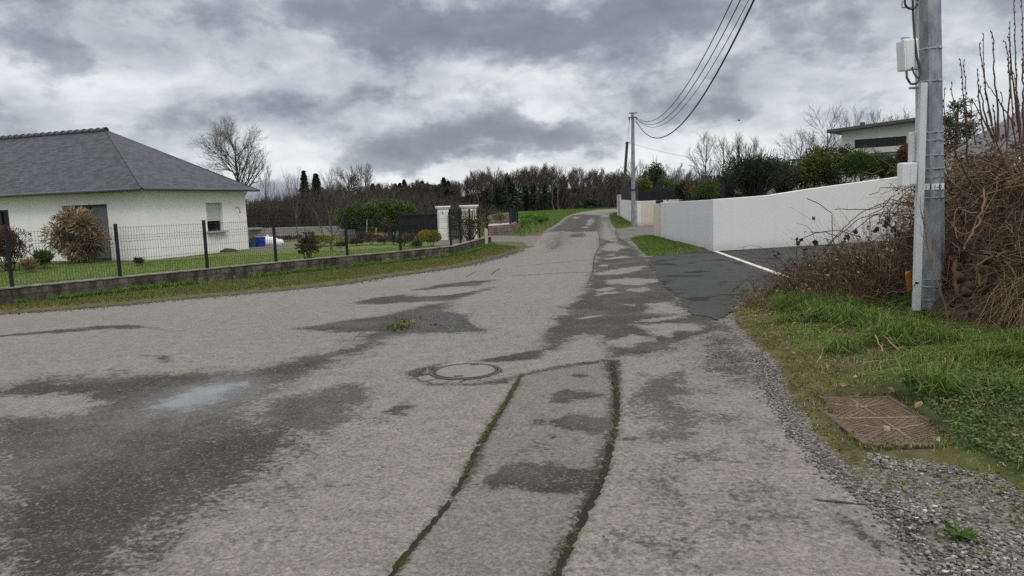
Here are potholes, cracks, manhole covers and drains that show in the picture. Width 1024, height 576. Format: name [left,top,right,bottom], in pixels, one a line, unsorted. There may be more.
manhole cover [418,363,502,383]
manhole cover [808,396,959,450]
